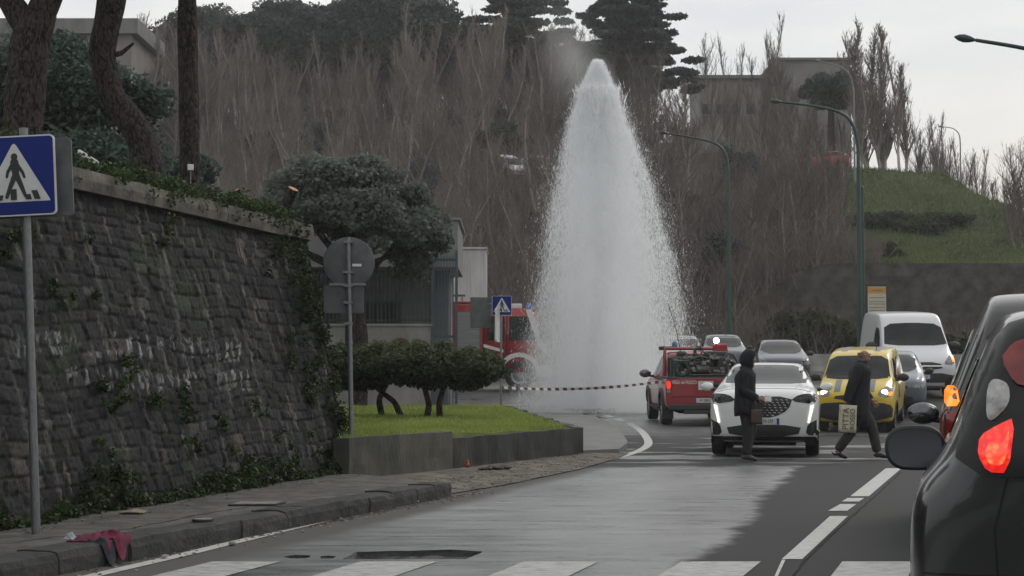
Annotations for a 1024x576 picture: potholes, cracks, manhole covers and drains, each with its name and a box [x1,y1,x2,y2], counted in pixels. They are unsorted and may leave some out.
pothole [343,550,482,559]
